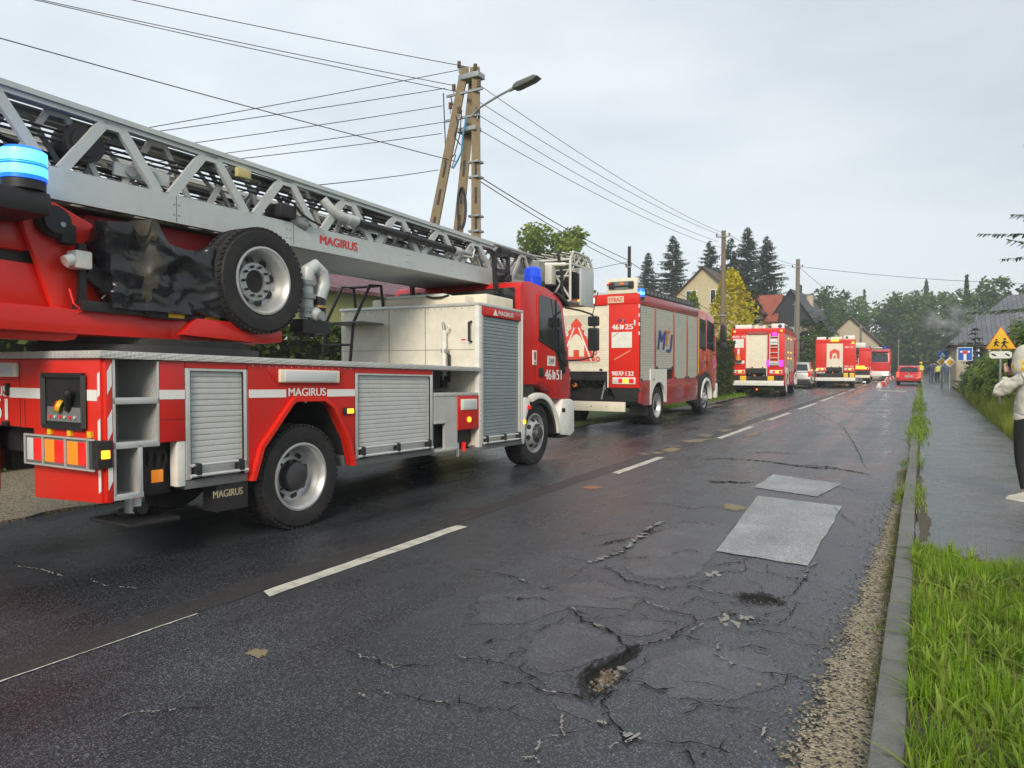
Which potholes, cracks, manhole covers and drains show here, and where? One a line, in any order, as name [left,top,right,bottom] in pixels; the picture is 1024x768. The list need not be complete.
crack [8,562,66,577]
crack [347,503,830,765]
pothole [740,595,777,605]
pothole [584,648,638,692]
crack [650,409,870,490]
